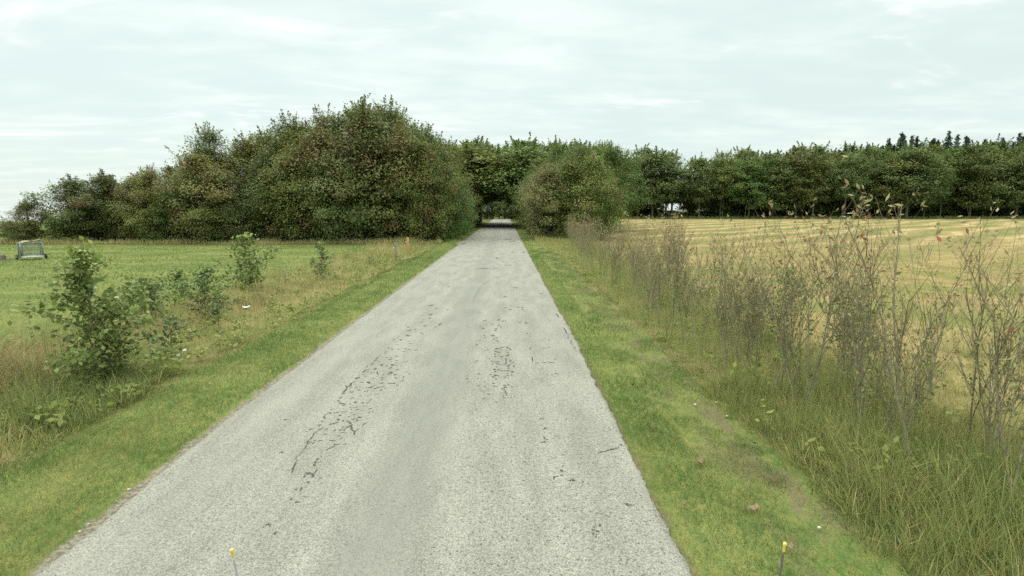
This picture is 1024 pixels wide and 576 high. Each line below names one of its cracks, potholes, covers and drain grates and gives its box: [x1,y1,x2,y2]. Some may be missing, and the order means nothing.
crack [279,305,449,503]
crack [467,287,576,403]
